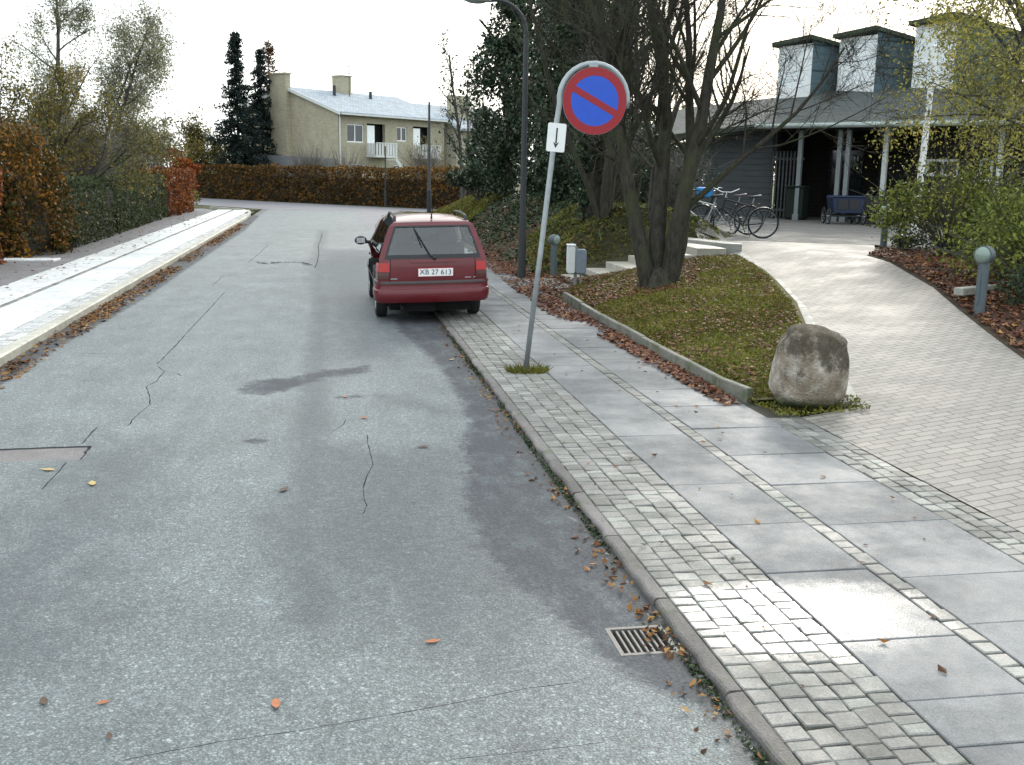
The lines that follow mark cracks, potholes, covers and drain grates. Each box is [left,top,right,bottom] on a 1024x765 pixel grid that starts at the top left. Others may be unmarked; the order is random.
crack [345,435,373,514]
crack [251,235,322,267]
drain grate [604,625,679,656]
crack [129,278,225,425]
